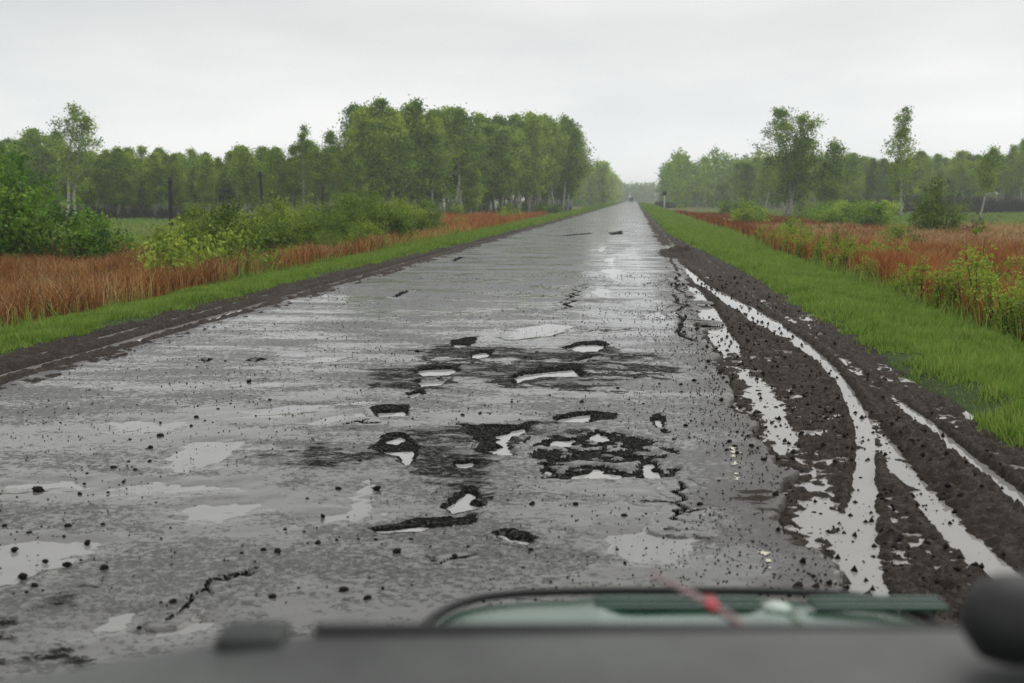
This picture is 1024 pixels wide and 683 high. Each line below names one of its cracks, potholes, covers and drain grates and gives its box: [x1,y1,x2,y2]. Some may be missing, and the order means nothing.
pothole [558,340,617,353]
pothole [364,431,425,471]
pothole [363,402,417,419]
pothole [407,362,468,383]
pothole [443,335,485,351]
crack [565,257,725,362]
crack [143,561,276,633]
pothole [408,375,461,389]
pothole [543,410,627,426]
pothole [431,485,496,518]
pothole [483,526,546,549]
pothole [440,459,485,470]
